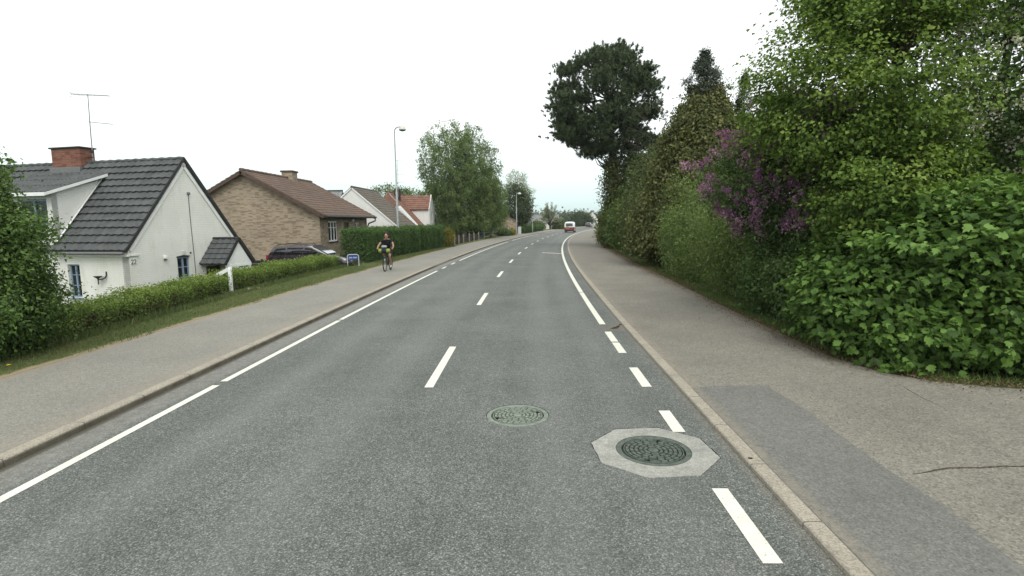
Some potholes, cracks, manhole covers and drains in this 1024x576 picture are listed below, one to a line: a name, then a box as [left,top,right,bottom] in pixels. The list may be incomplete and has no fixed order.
manhole cover [487,405,549,427]
crack [915,465,1024,474]
